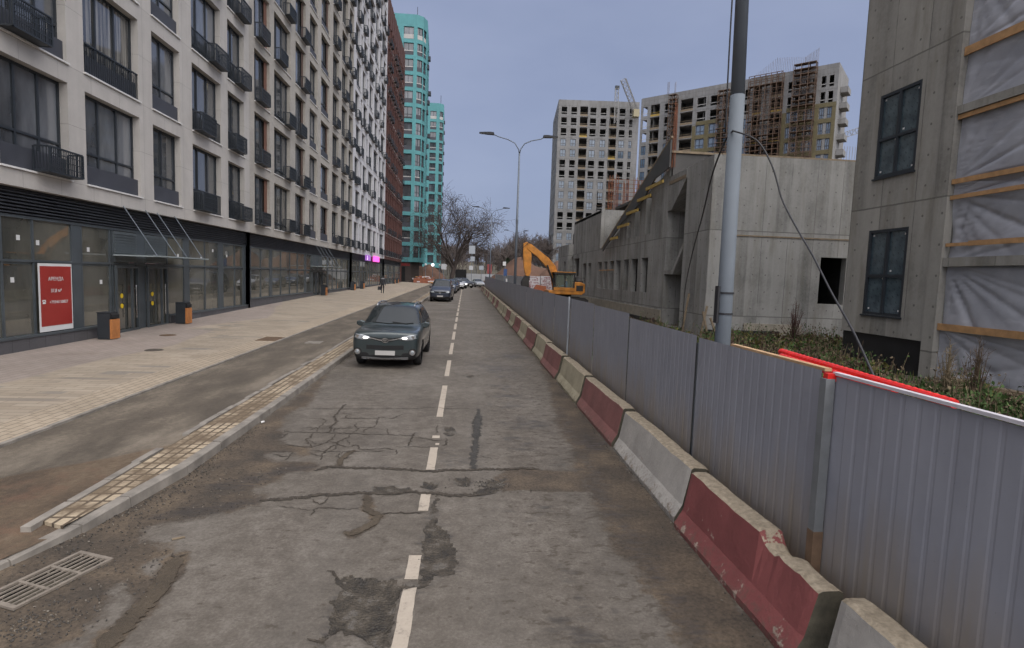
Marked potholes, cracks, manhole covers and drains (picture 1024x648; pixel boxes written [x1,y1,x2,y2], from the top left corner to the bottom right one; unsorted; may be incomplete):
crack [260,490,484,536]
drain grate [0,550,114,611]
crack [272,404,539,472]
